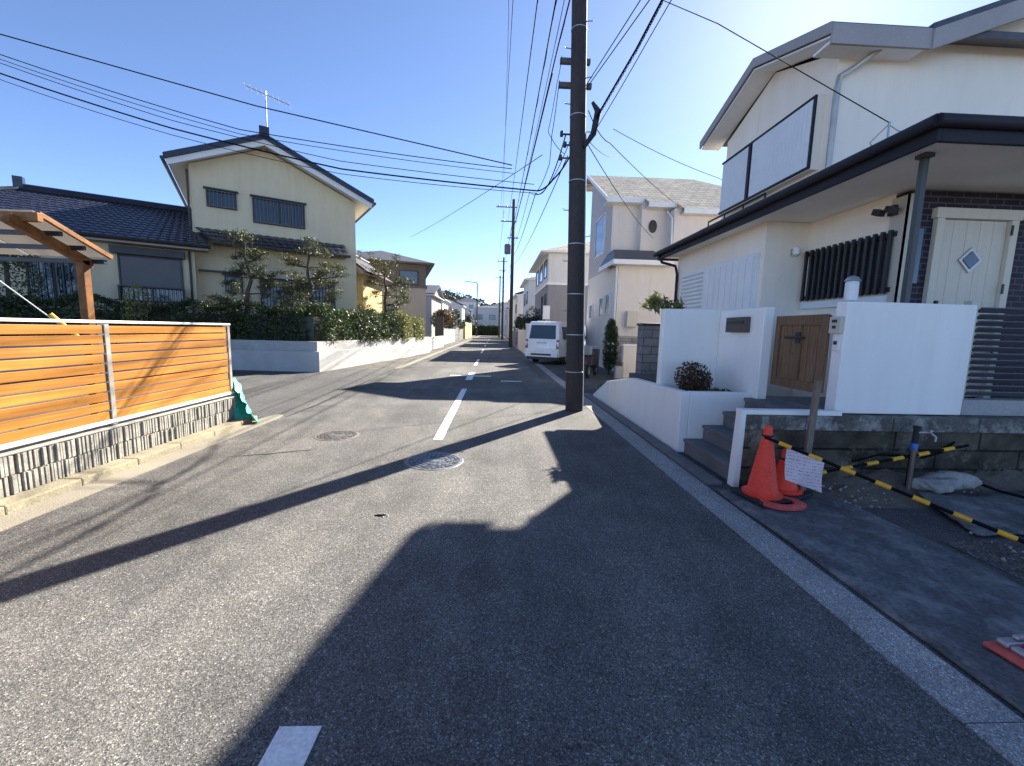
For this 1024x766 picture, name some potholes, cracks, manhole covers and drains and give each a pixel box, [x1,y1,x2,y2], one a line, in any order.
manhole cover [404,452,464,471]
manhole cover [314,430,359,441]
